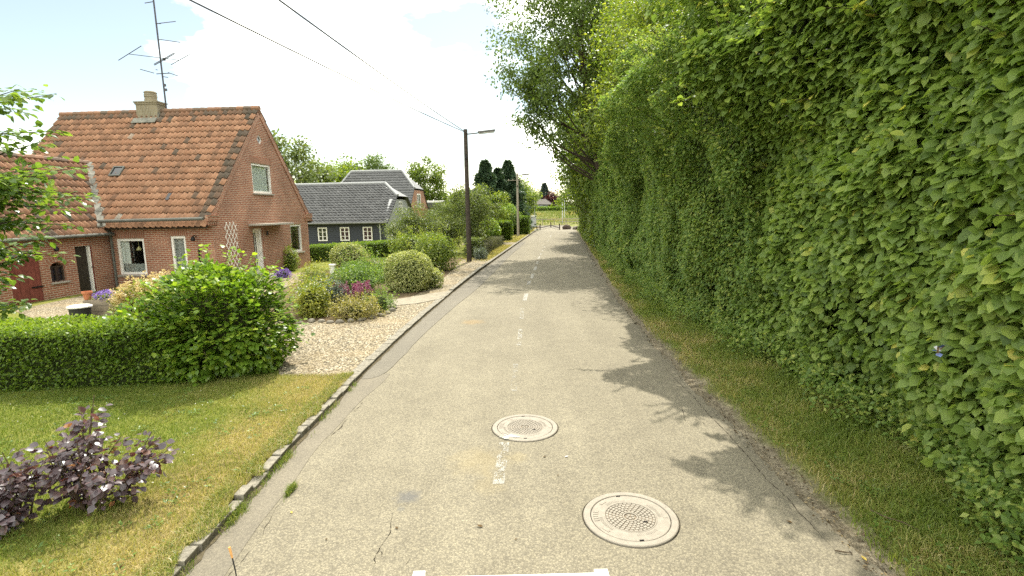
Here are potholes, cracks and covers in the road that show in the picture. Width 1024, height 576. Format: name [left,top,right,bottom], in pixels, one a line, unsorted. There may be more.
manhole cover [582,492,681,549]
manhole cover [491,414,559,442]
